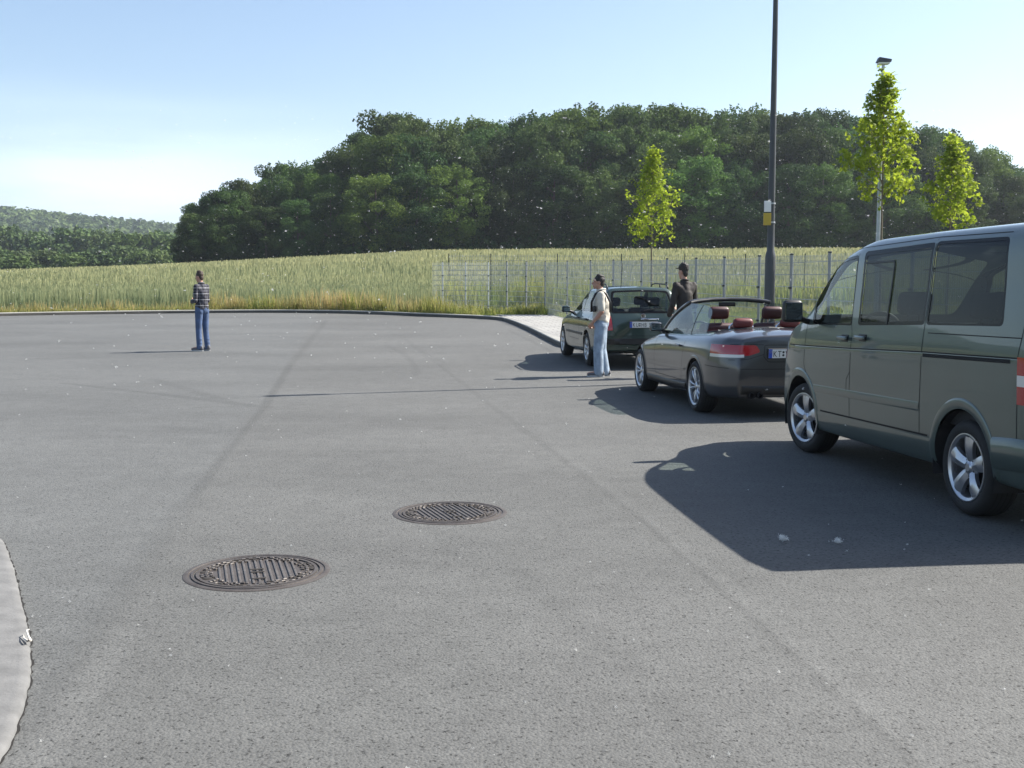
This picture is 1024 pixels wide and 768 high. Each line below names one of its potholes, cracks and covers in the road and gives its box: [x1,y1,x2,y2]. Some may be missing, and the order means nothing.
manhole cover [182,554,330,592]
manhole cover [393,501,507,525]
